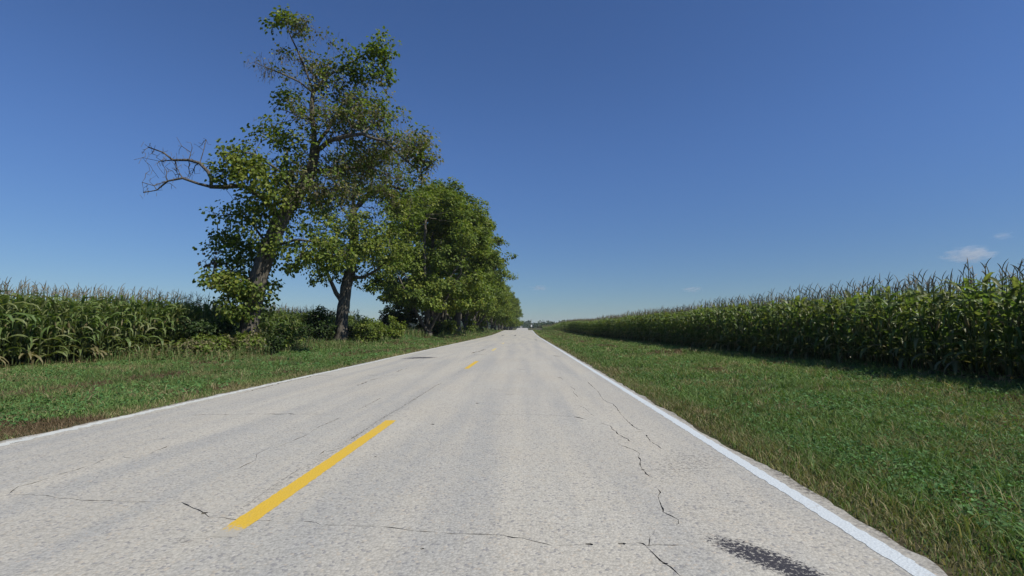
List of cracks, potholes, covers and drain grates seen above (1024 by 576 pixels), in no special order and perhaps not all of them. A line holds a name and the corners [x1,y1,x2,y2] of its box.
crack [5,376,679,575]
